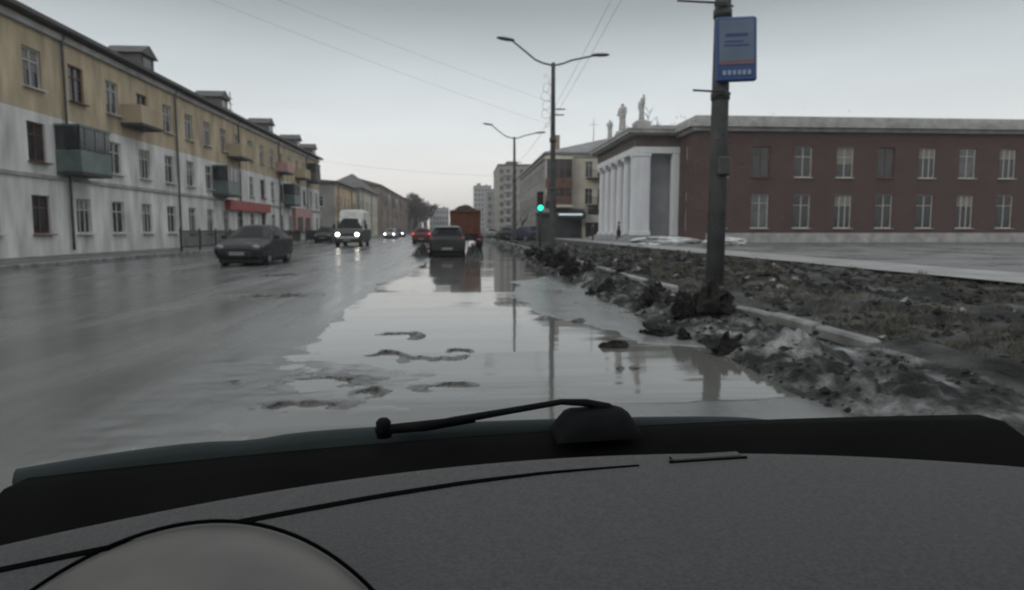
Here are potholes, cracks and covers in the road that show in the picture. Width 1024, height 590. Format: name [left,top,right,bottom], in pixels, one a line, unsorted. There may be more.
pothole [258,372,390,393]
pothole [364,349,411,364]
pothole [247,399,366,413]
pothole [374,331,426,340]
pothole [406,381,480,393]
pothole [348,385,392,399]
